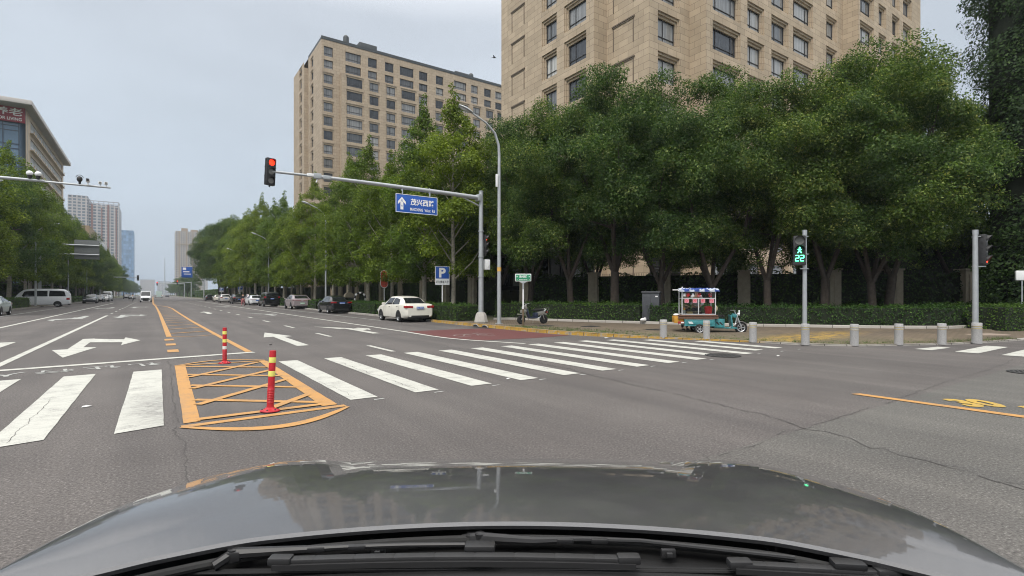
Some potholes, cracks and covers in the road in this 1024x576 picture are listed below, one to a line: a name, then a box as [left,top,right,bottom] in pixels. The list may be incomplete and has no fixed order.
crack [168,359,190,483]
